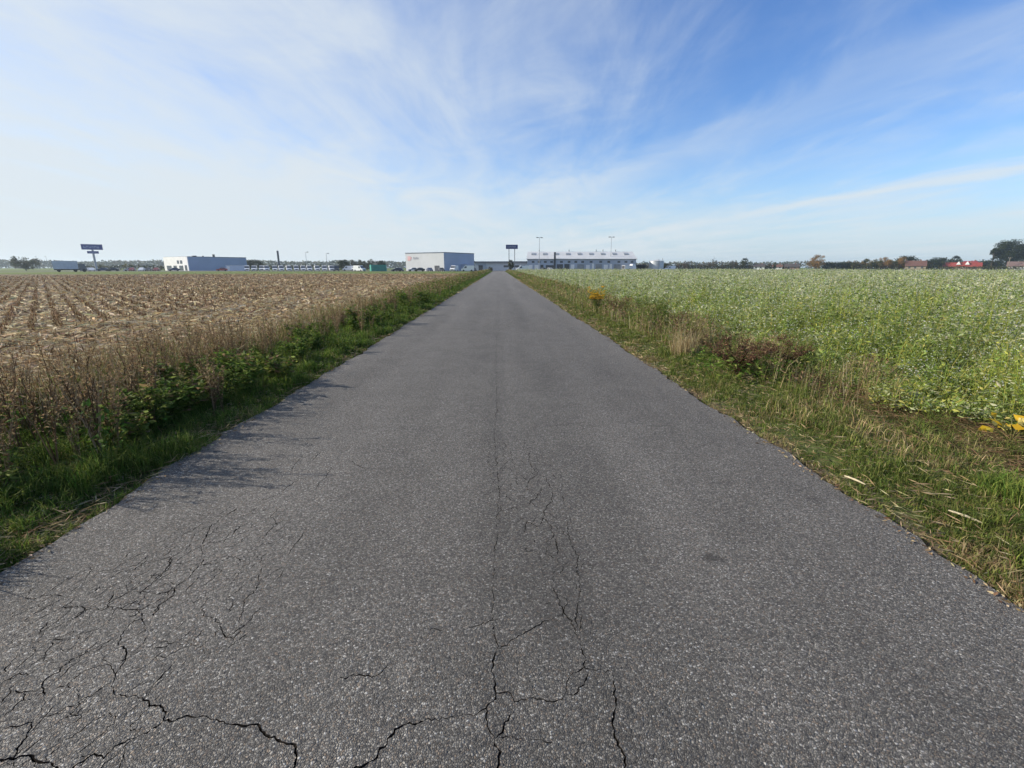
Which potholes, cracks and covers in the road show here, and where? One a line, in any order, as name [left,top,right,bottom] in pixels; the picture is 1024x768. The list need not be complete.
crack [353,439,627,768]
crack [0,507,308,768]
